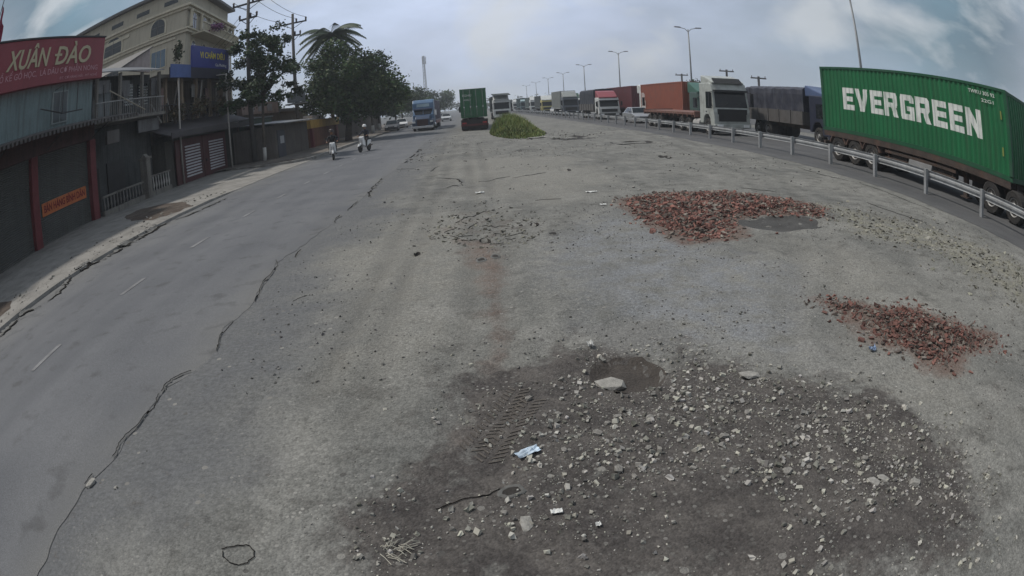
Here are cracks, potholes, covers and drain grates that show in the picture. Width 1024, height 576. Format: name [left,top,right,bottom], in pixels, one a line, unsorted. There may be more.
pothole [590,357,667,393]
crack [429,166,545,188]
crack [445,211,524,244]
crack [436,488,500,510]
crack [0,198,226,336]
crack [221,544,255,565]
crack [112,370,191,457]
pothole [497,484,527,499]
crack [334,168,410,223]
crack [216,322,233,352]
crack [255,249,302,302]
